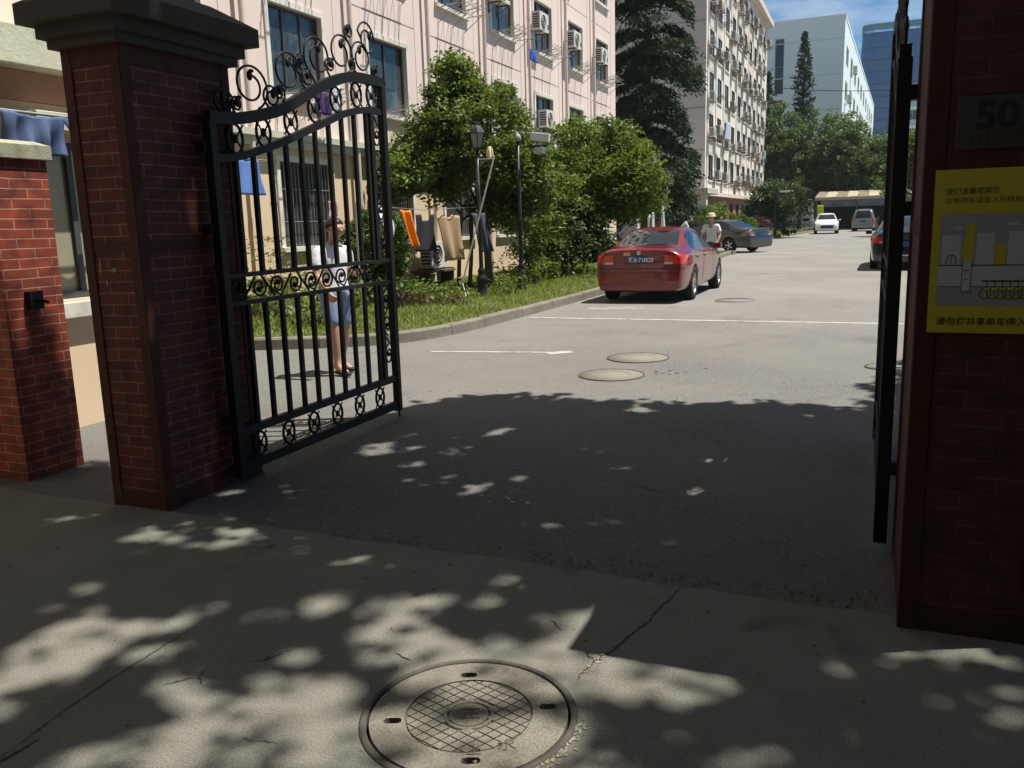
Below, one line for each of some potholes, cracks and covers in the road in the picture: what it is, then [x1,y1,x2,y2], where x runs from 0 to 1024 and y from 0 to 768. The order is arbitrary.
manhole cover [579,369,645,382]
manhole cover [359,659,578,768]
crack [577,589,679,680]
manhole cover [607,352,670,363]
